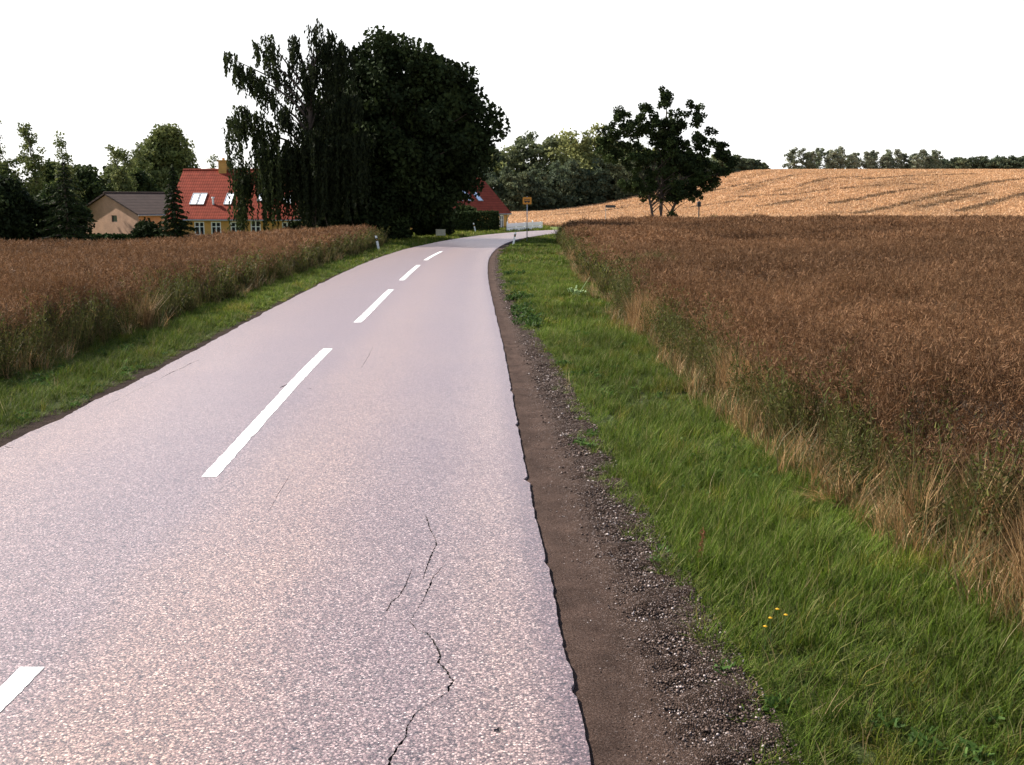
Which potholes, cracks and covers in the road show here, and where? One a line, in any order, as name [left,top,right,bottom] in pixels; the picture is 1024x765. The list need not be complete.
crack [386,515,454,765]
